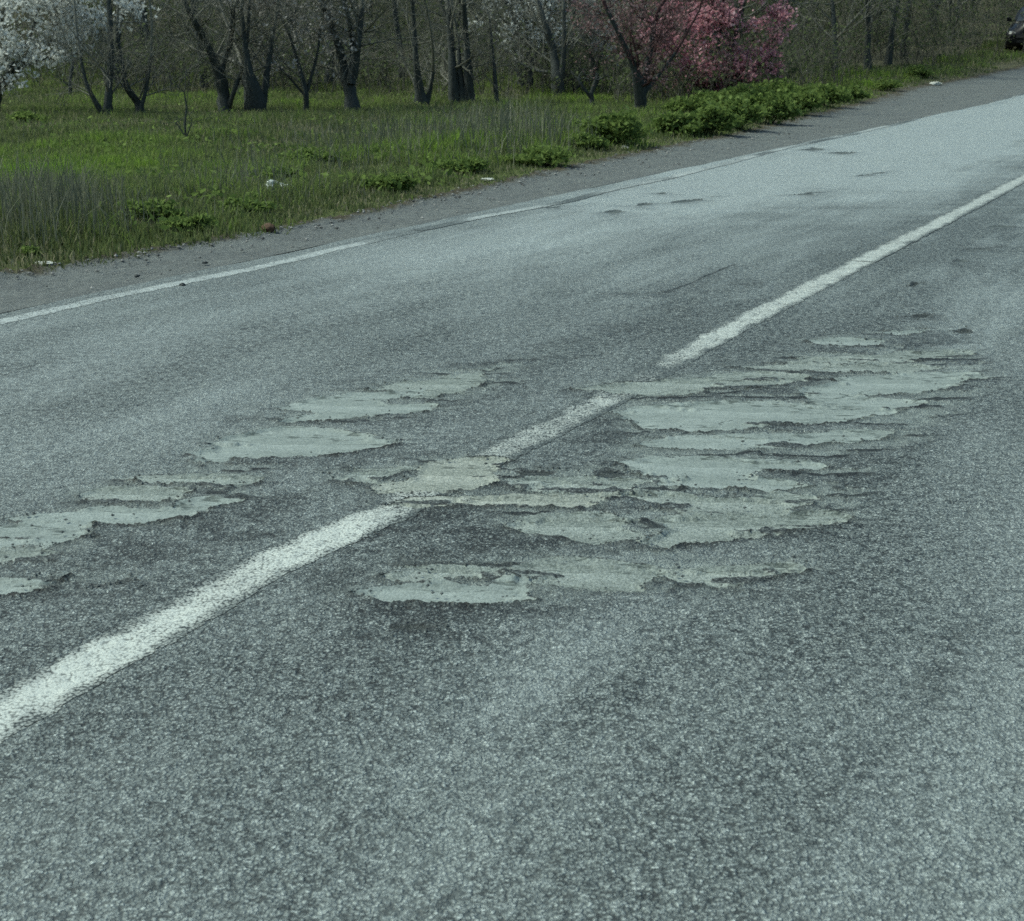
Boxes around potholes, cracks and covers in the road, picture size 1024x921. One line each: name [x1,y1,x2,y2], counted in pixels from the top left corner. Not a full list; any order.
pothole [660,560,807,588]
pothole [369,455,510,495]
pothole [4,495,246,527]
pothole [617,455,829,486]
pothole [190,425,398,463]
pothole [78,481,192,504]
pothole [609,394,928,432]
pothole [113,472,263,489]
pothole [504,475,647,495]
pothole [619,488,821,520]
pothole [0,576,53,595]
pothole [279,388,439,423]
